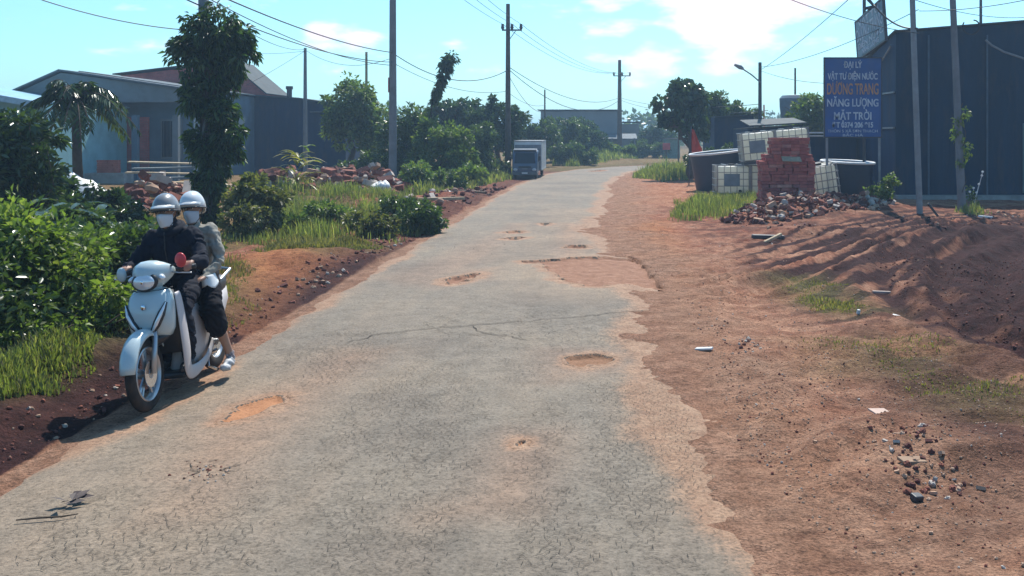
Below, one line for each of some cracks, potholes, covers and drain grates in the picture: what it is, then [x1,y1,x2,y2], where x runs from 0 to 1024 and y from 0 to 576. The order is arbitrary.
pothole [215,394,291,425]
pothole [509,438,531,449]
crack [262,303,657,392]
pothole [561,353,618,369]
pothole [517,256,689,291]
pothole [440,272,484,285]
